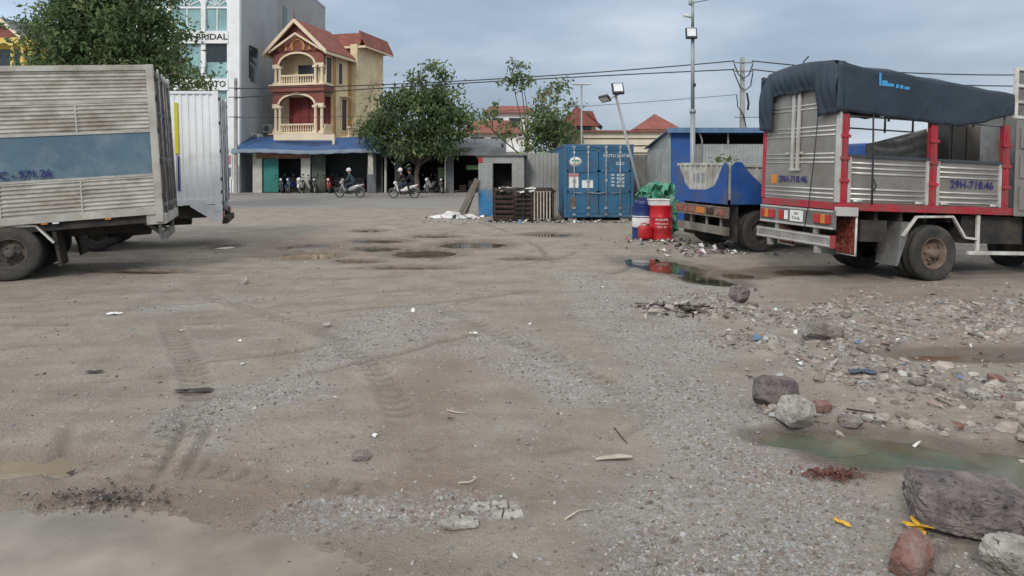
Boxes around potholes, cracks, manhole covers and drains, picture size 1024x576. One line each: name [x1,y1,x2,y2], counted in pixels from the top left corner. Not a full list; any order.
pothole [344,245,408,253]
pothole [429,240,515,250]
pothole [264,251,348,260]
pothole [386,248,465,259]
